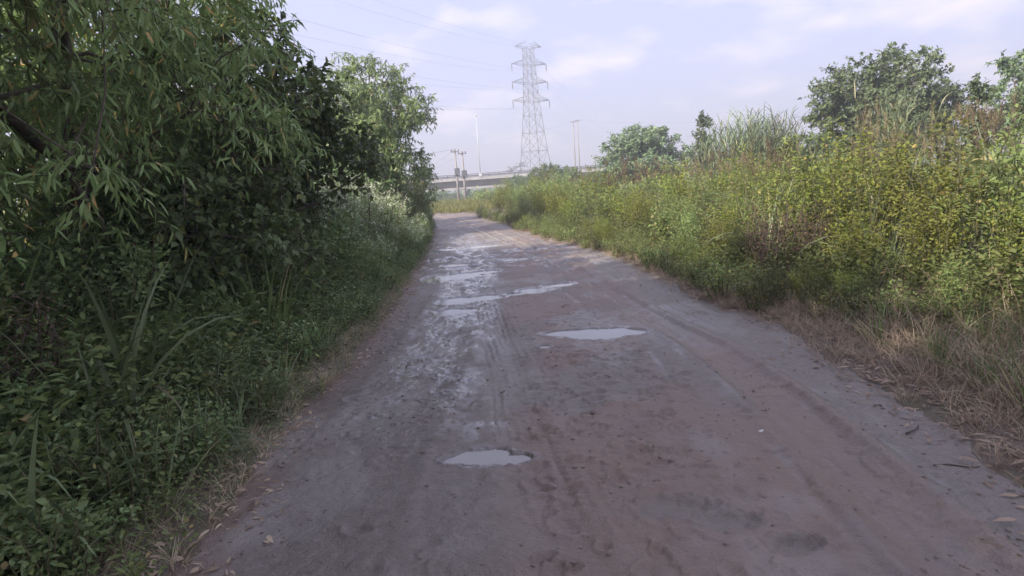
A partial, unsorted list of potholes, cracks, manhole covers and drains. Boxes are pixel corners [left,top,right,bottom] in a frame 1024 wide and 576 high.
pothole [540,325,652,340]
pothole [433,293,507,306]
pothole [505,281,578,296]
pothole [438,446,537,467]
pothole [433,307,480,316]
pothole [420,269,501,283]
